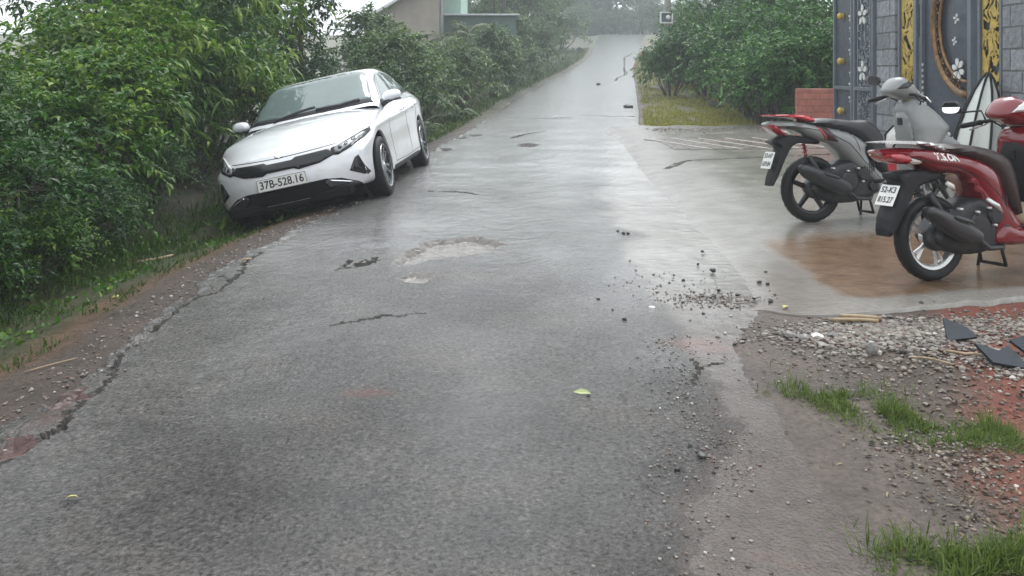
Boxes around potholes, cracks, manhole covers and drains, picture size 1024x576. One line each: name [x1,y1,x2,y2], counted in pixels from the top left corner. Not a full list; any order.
crack [148,252,264,333]
crack [0,347,131,465]
crack [510,118,556,139]
pothole [391,236,505,267]
crack [663,153,832,169]
crack [328,313,427,326]
pothole [396,272,436,283]
